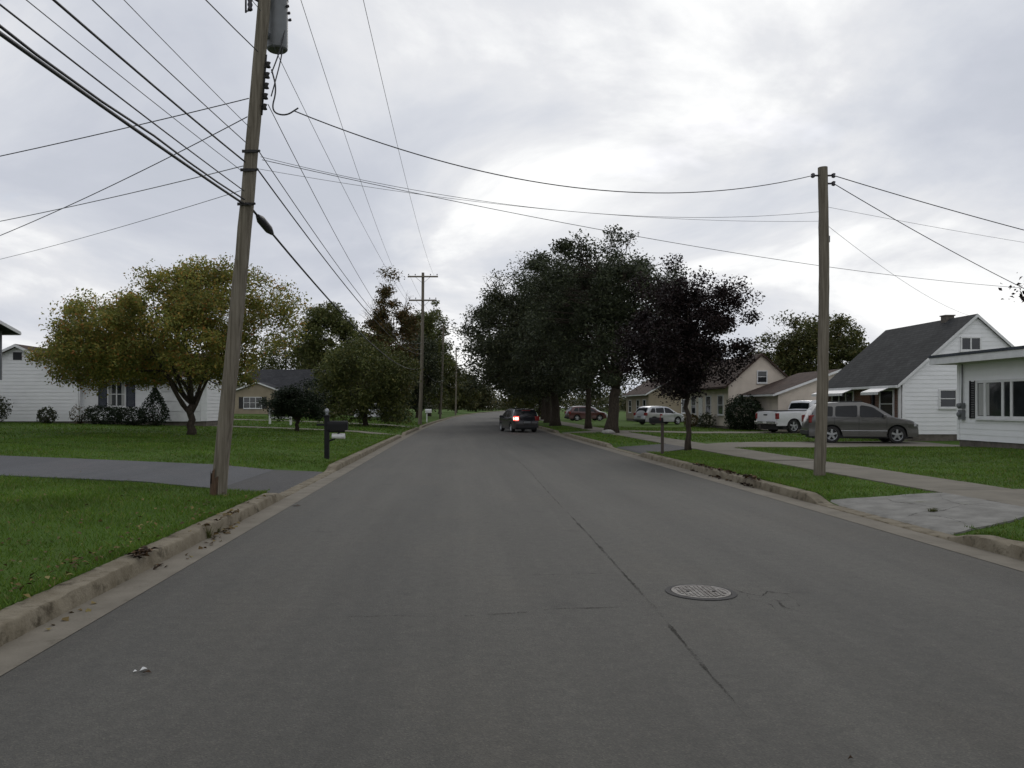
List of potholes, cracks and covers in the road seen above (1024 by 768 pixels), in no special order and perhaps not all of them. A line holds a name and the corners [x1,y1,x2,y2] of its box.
crack [516,458,721,685]
manhole cover [665,584,737,601]
